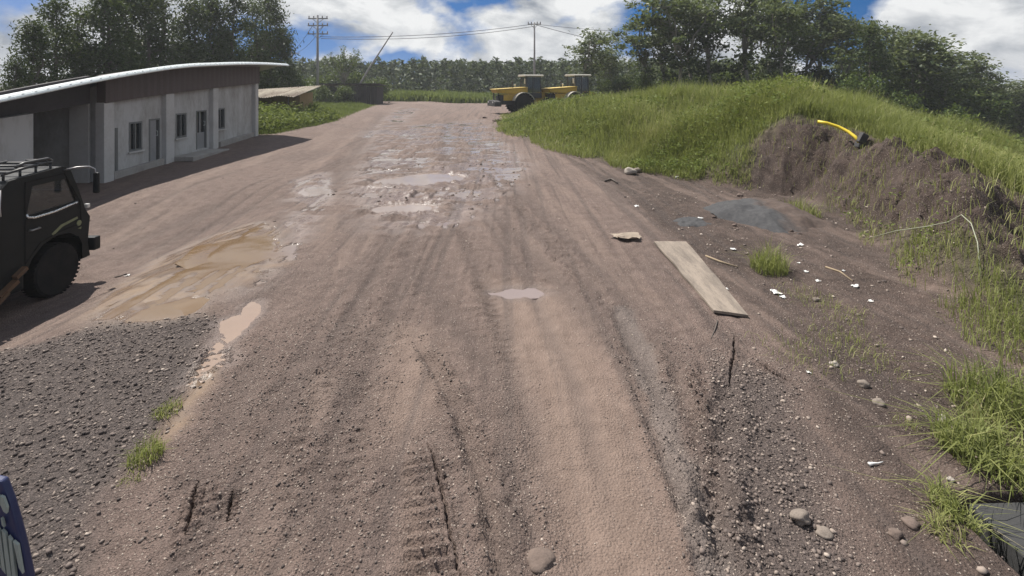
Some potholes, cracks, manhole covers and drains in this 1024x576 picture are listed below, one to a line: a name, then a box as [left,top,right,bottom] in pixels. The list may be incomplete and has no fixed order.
crack [174,479,242,539]
pothole [356,170,480,189]
pothole [351,199,458,217]
